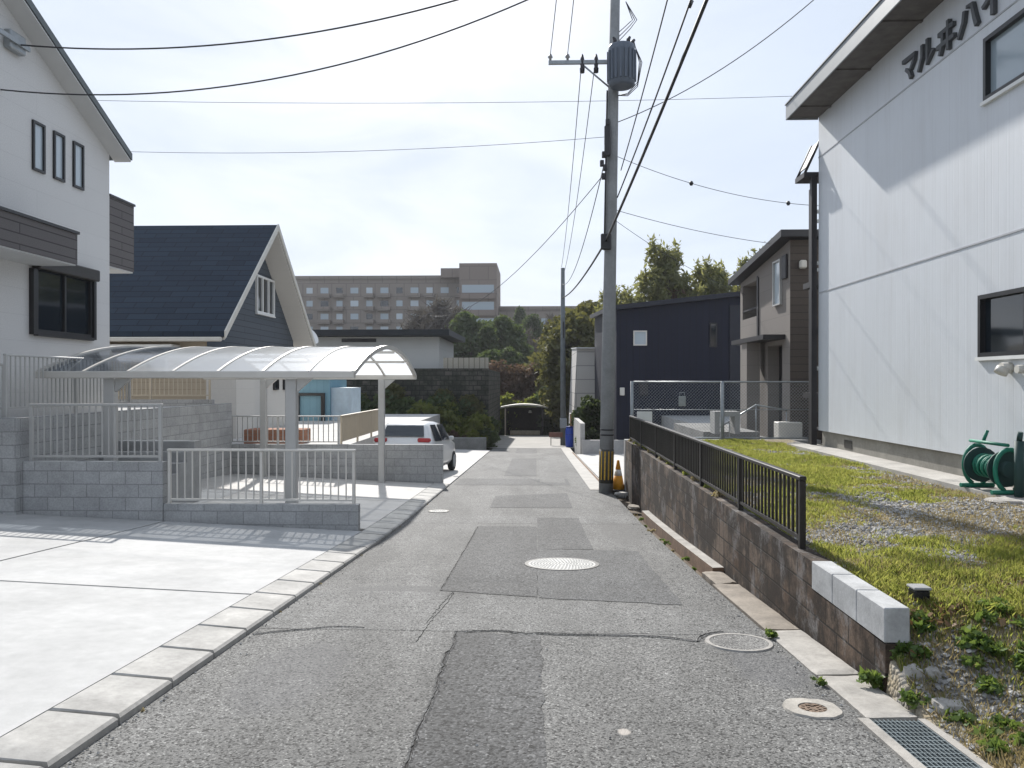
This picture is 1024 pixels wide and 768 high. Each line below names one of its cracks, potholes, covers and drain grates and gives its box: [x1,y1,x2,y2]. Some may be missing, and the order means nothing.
manhole cover [524,557,599,571]
crack [402,526,723,768]
drain grate [857,718,993,768]
manhole cover [782,698,844,720]
manhole cover [705,633,774,653]
